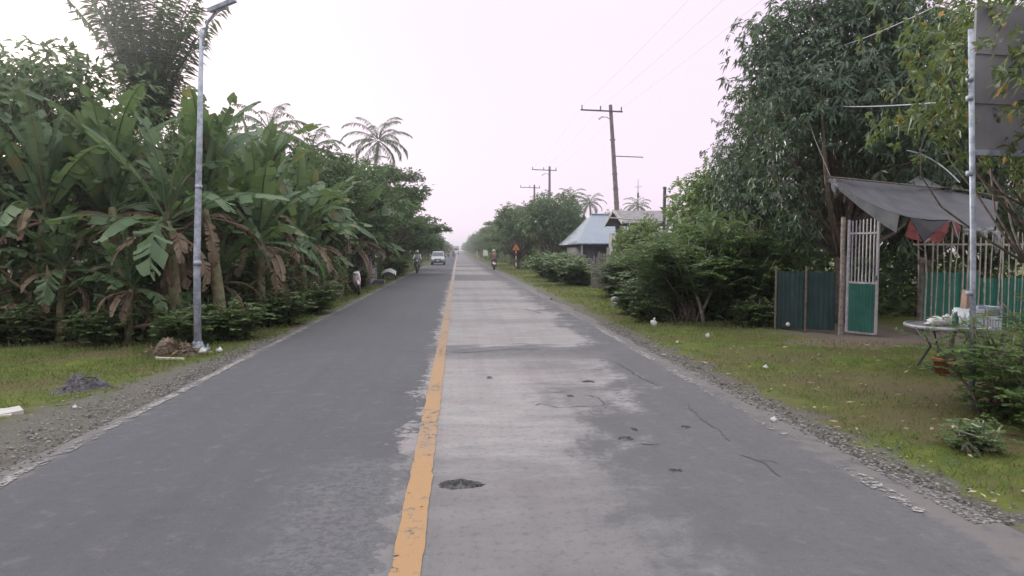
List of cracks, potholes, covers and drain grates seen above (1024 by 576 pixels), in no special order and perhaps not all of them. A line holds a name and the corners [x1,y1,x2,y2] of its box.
crack [688,404,780,476]
pothole [438,478,486,490]
